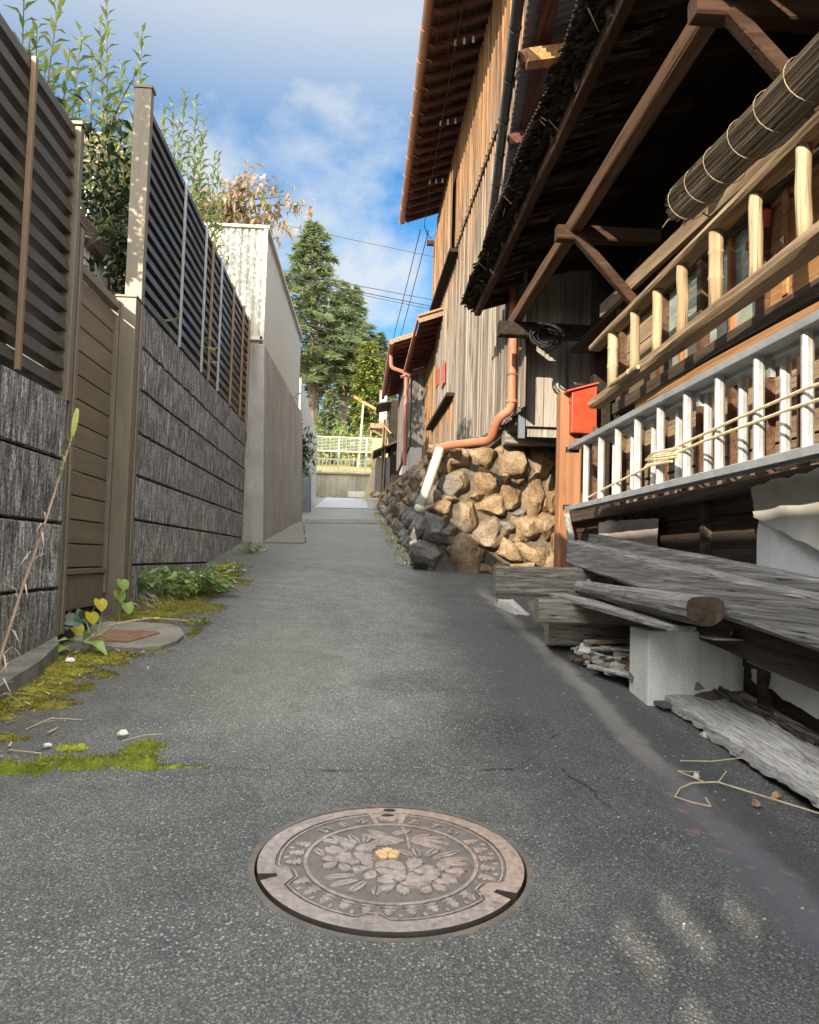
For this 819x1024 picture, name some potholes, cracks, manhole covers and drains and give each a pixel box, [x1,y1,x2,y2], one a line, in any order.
crack [554,762,618,812]
manhole cover [72,621,184,652]
manhole cover [248,805,534,943]
